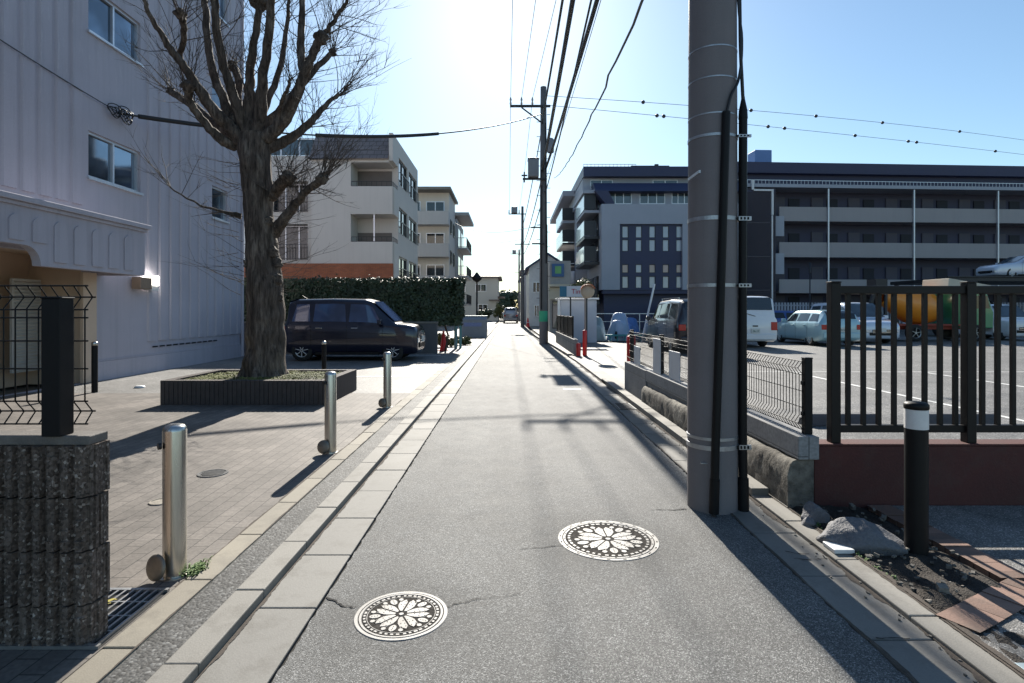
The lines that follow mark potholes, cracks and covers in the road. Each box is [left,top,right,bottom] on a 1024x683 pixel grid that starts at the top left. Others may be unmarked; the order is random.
manhole cover [353,591,448,642]
manhole cover [558,520,660,561]
manhole cover [196,469,229,478]
